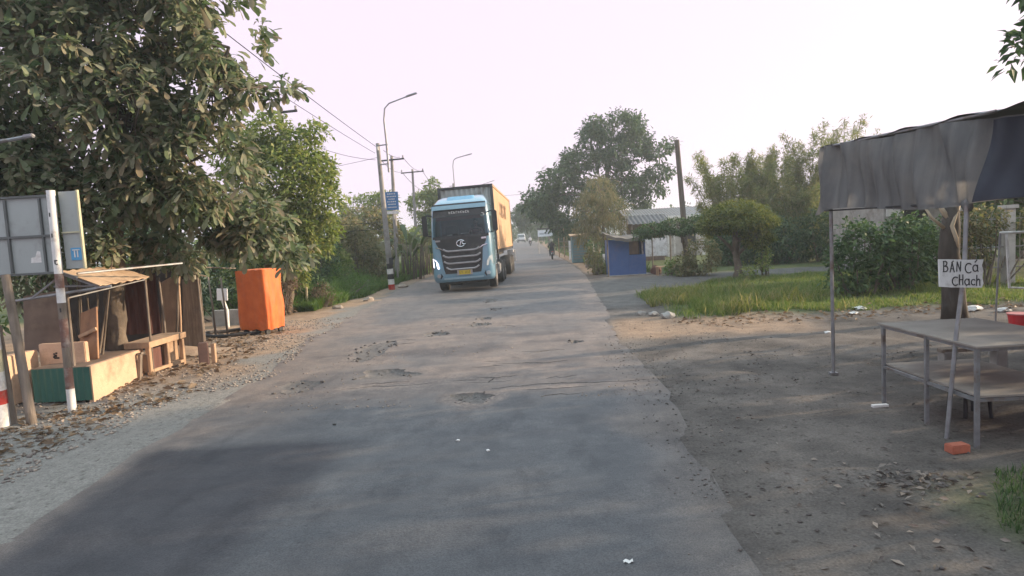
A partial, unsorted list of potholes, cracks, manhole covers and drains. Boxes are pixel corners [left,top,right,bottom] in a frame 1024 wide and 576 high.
pothole [352,369,423,380]
crack [457,349,646,397]
pothole [450,391,495,404]
pothole [347,340,398,363]
